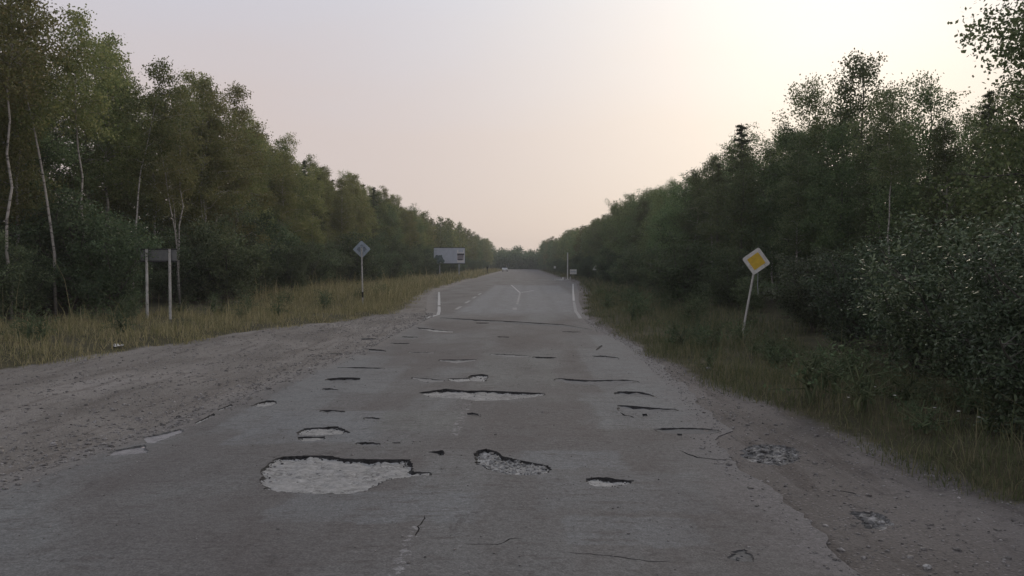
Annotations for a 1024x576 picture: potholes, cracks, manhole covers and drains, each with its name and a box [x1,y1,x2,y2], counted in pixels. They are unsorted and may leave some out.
pothole [142,429,185,443]
pothole [296,426,350,435]
pothole [586,477,634,487]
pothole [473,449,552,476]
pothole [740,444,800,466]
pothole [849,511,895,531]
pothole [259,455,432,494]
pothole [419,389,545,401]
pothole [448,374,488,382]
pothole [107,445,149,455]
